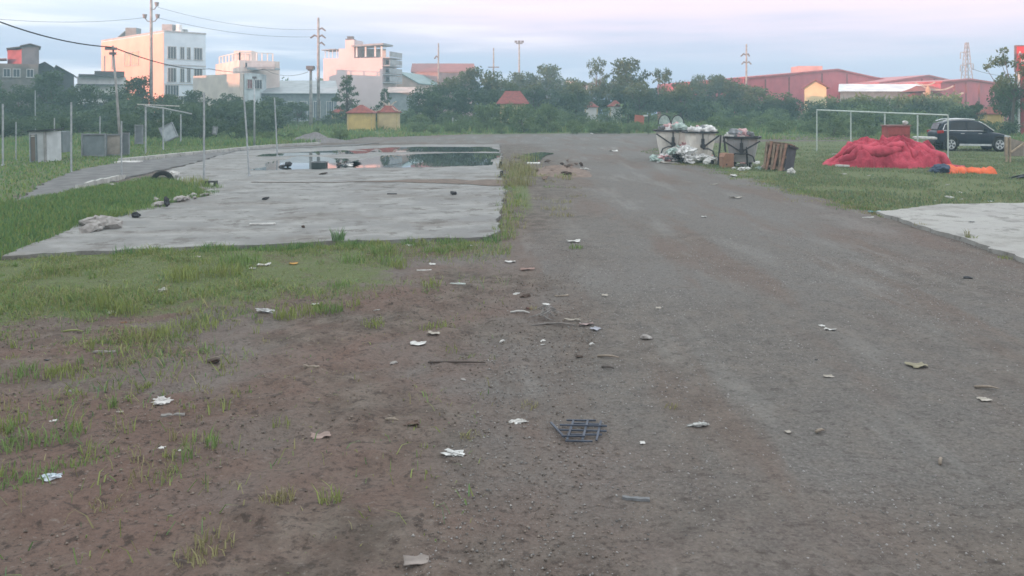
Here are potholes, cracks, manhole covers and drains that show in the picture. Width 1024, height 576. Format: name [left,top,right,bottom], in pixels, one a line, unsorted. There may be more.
drain grate [550,419,607,442]
